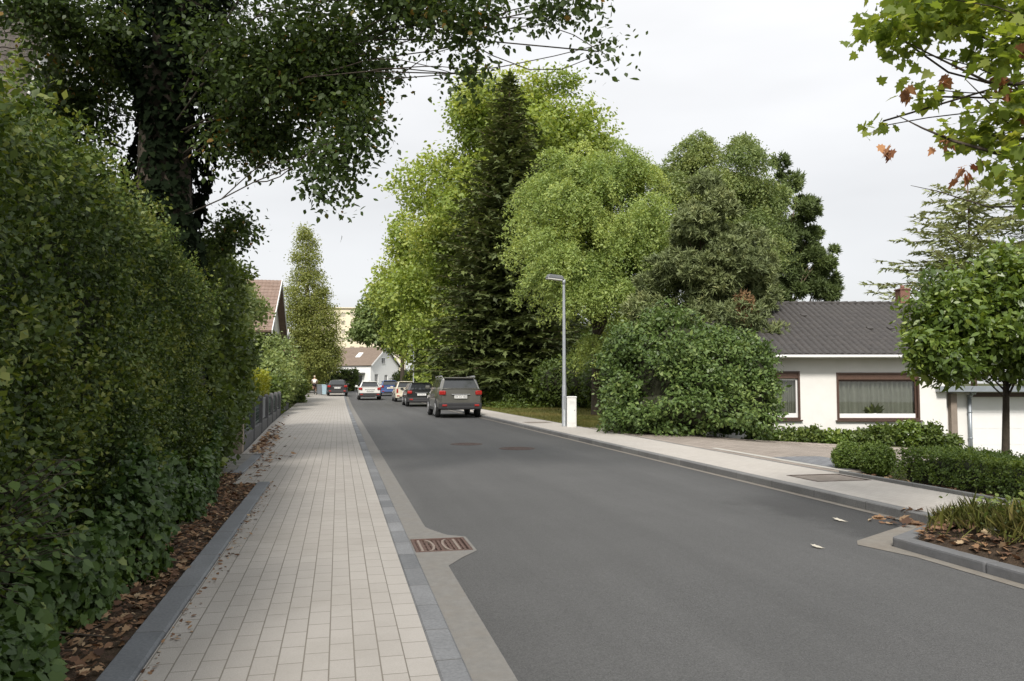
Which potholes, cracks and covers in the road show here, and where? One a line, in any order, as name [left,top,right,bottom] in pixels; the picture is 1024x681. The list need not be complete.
drain grate [411,537,473,552]
manhole cover [787,474,870,482]
